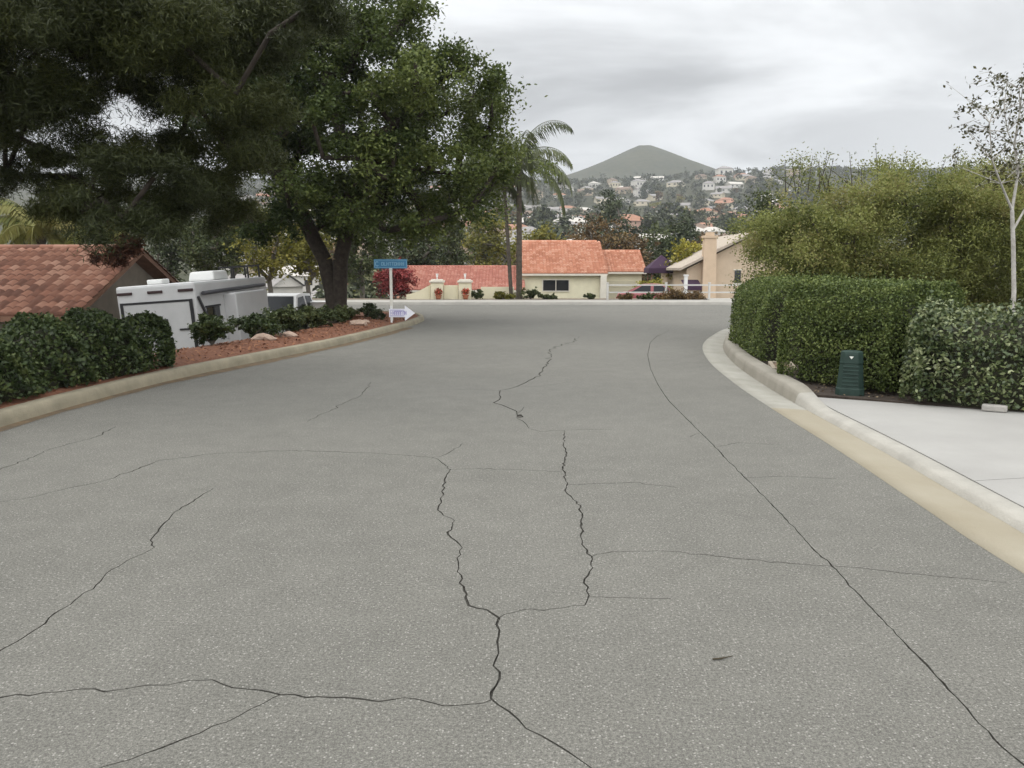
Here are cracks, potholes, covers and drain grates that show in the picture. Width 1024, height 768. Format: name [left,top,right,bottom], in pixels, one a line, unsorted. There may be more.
crack [0,429,825,768]
crack [454,336,580,428]
